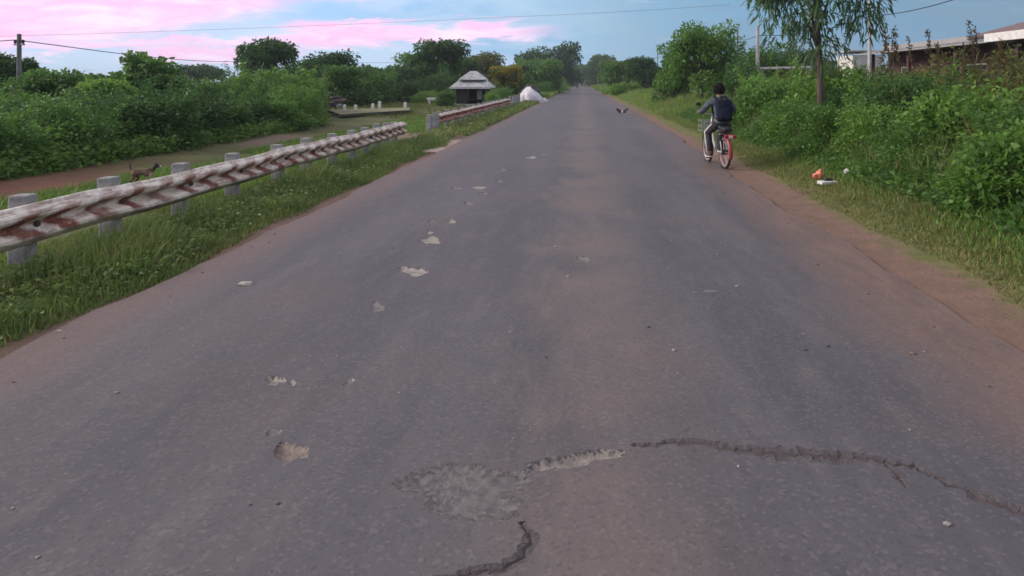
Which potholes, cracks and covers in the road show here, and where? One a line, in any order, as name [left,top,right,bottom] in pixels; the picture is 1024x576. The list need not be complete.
crack [433,521,540,576]
pothole [264,376,287,385]
pothole [273,441,310,462]
pothole [370,300,385,313]
pothole [519,448,629,474]
pothole [419,235,441,244]
crack [630,438,1024,517]
pothole [398,266,429,277]
